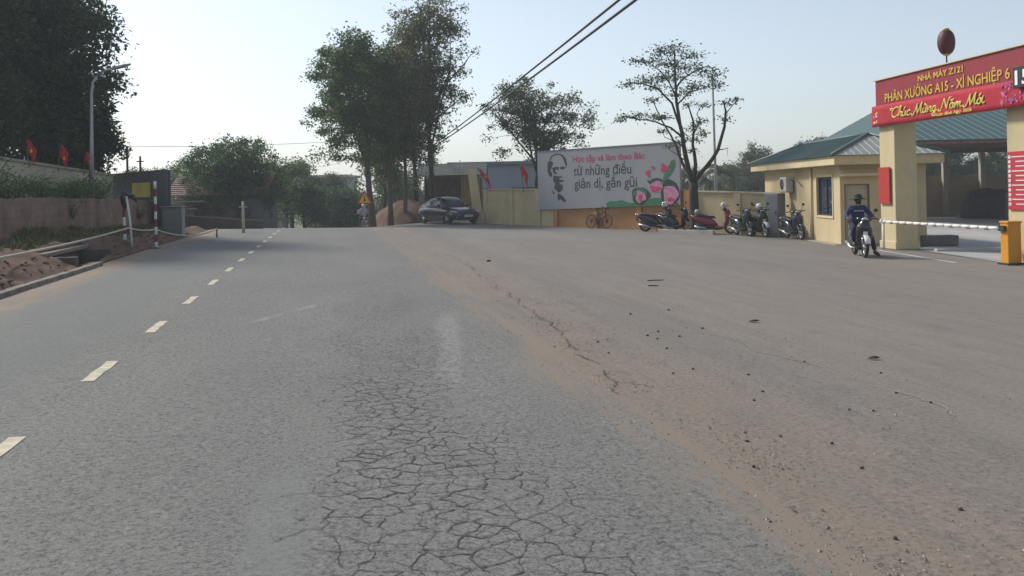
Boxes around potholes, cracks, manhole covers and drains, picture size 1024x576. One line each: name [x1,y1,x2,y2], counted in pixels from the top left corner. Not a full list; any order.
crack [697,331,956,416]
crack [445,254,649,394]
